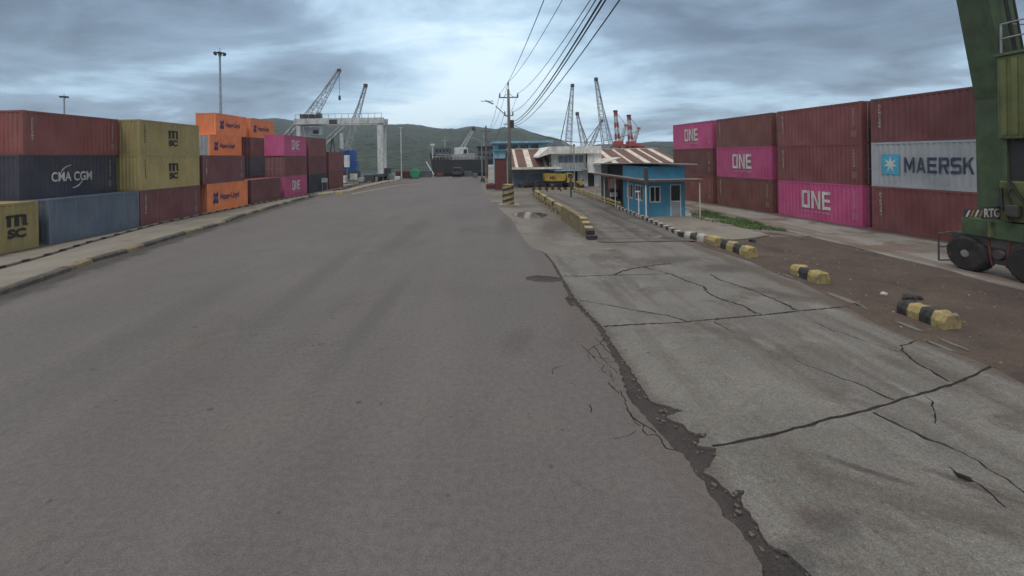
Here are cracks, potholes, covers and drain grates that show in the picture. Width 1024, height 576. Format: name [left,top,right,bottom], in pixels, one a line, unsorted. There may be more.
crack [545,254,1024,576]
